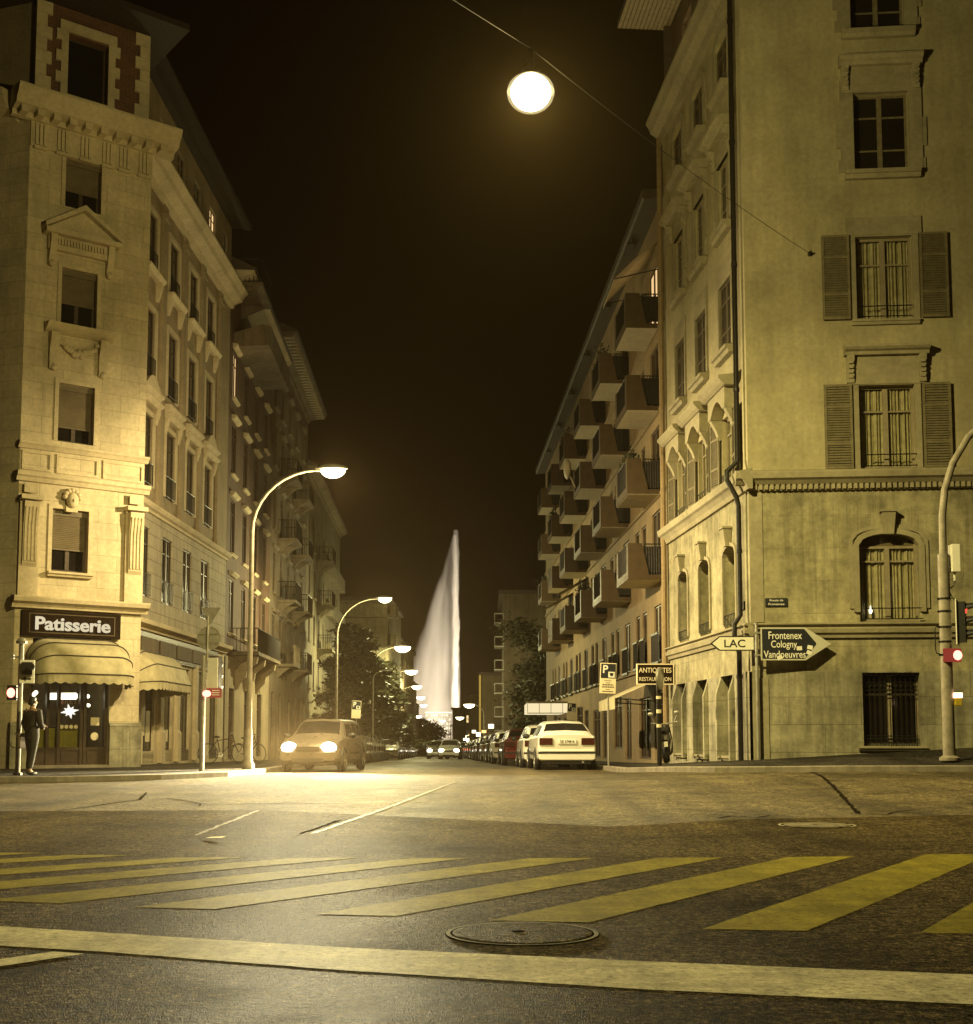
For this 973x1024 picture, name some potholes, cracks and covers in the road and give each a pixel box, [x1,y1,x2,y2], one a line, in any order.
manhole cover [445,922,600,946]
crack [811,772,861,814]
